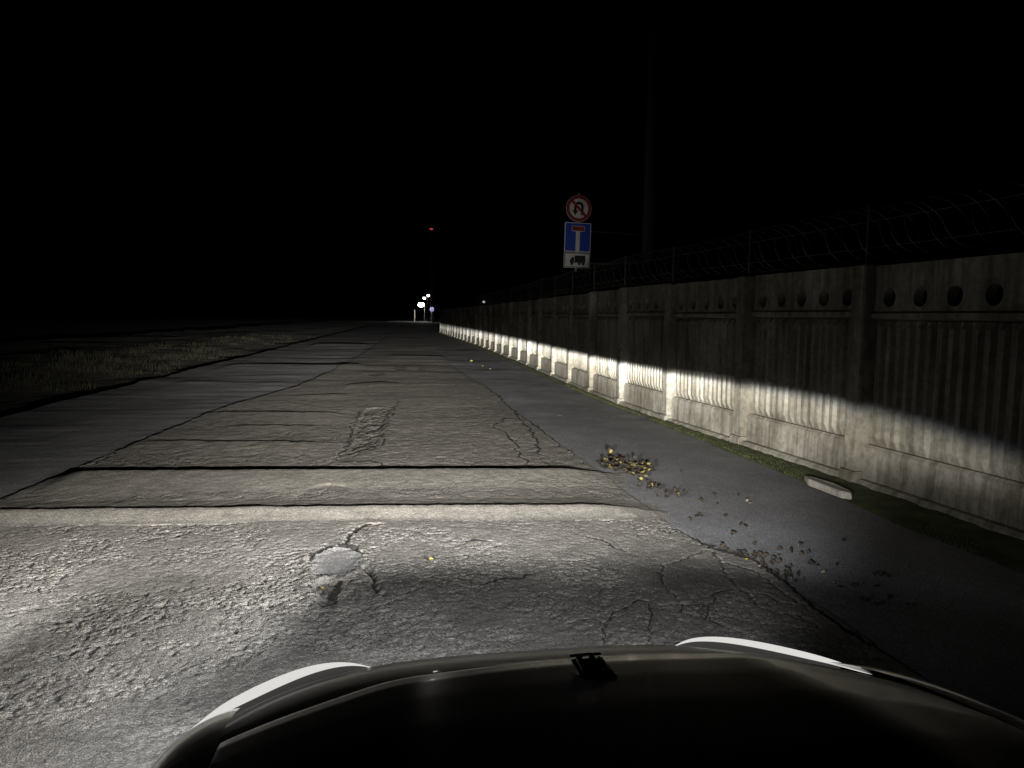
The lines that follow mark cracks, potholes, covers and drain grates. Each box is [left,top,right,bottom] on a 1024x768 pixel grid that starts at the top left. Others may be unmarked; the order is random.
pothole [308,546,363,576]
crack [572,523,929,682]
pothole [310,576,343,608]
crack [79,374,399,469]
